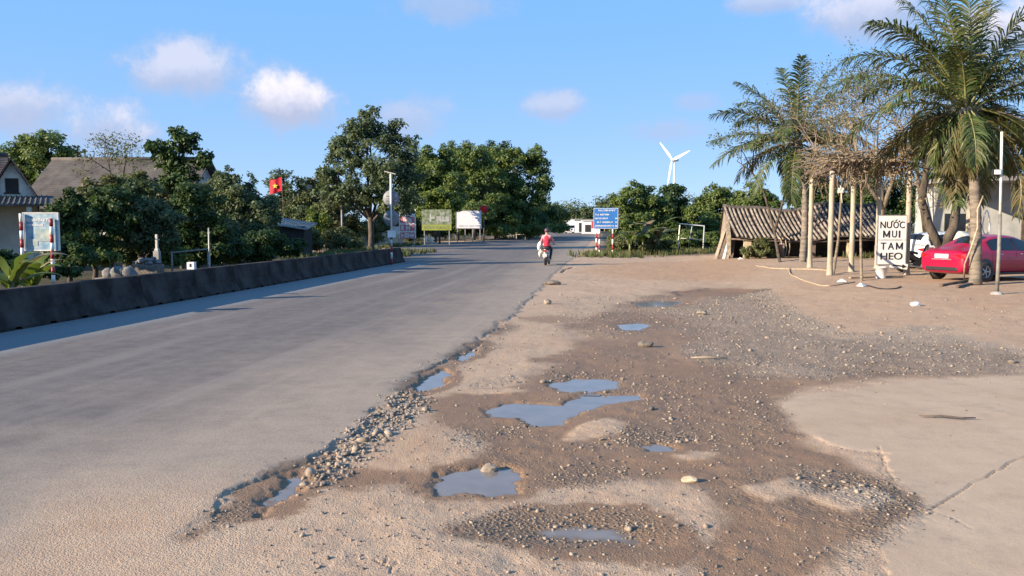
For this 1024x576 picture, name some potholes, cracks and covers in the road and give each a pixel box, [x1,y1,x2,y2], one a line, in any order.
pothole [469,506,697,560]
crack [916,455,1024,530]
pothole [469,391,655,429]
pothole [448,341,488,362]
pothole [610,321,654,331]
pothole [538,375,634,396]
pothole [239,467,332,519]
pothole [398,366,459,394]
pothole [420,457,537,500]
